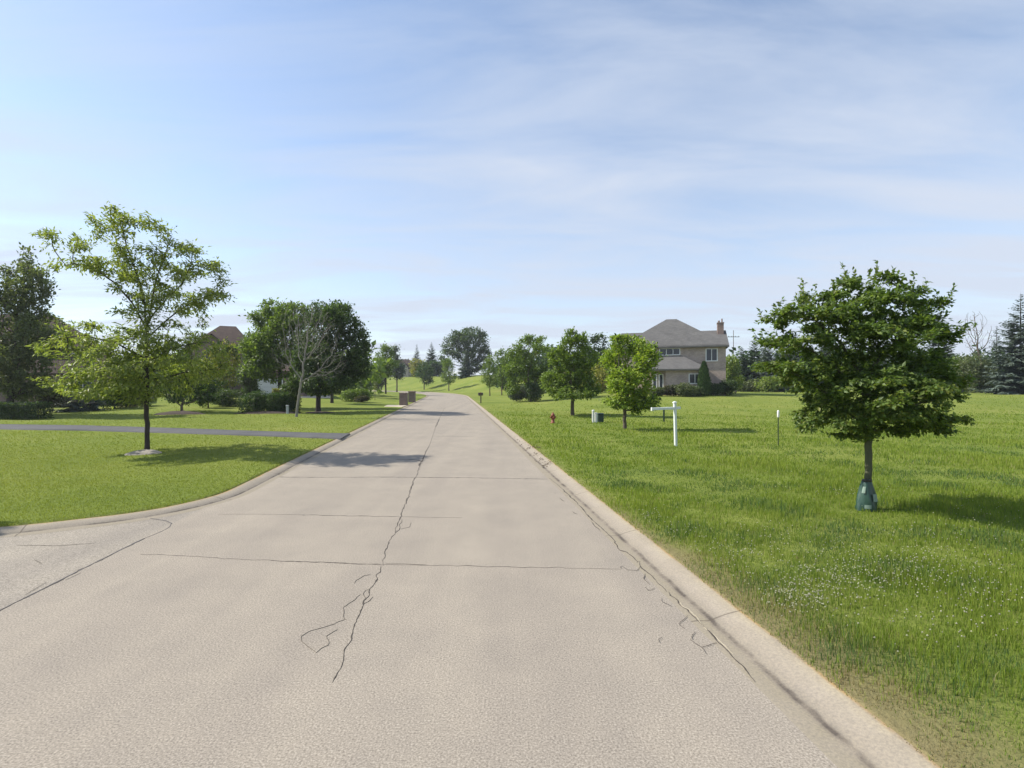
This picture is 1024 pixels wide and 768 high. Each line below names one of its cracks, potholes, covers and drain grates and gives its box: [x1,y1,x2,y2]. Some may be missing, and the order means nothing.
crack [553,481,754,680]
crack [142,416,601,681]
